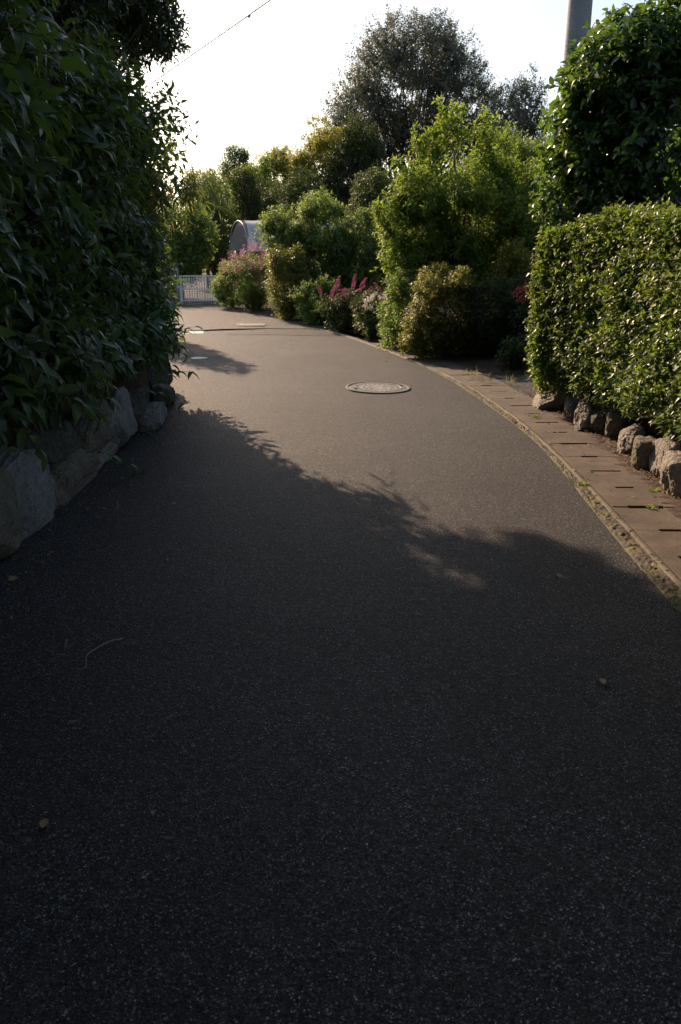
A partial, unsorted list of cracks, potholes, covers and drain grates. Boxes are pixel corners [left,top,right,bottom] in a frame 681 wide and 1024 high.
manhole cover [345,381,411,394]
